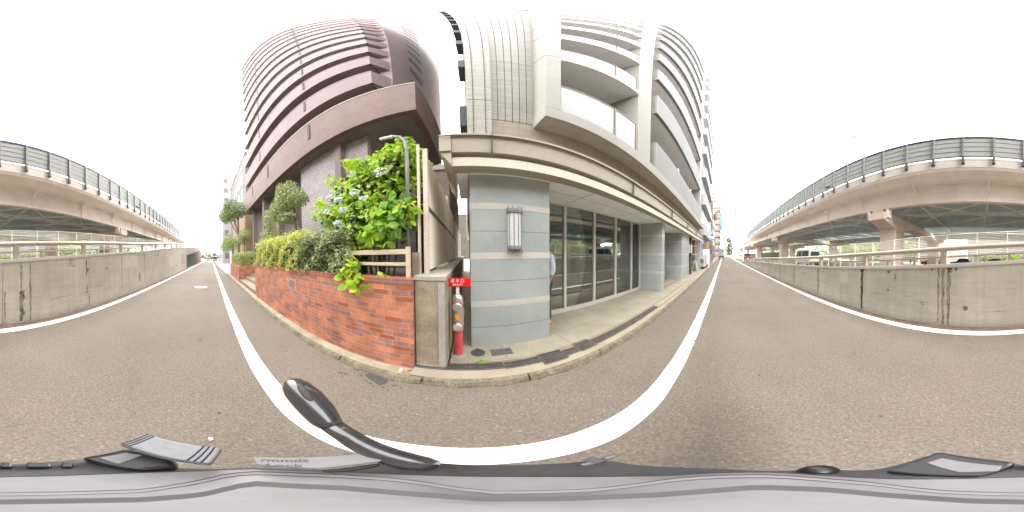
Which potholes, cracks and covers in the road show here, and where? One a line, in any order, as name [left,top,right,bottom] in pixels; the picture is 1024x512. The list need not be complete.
utility cover [490,347,514,356]
drain grate [571,338,597,351]
drain grate [536,349,569,365]
drain grate [561,346,581,356]
